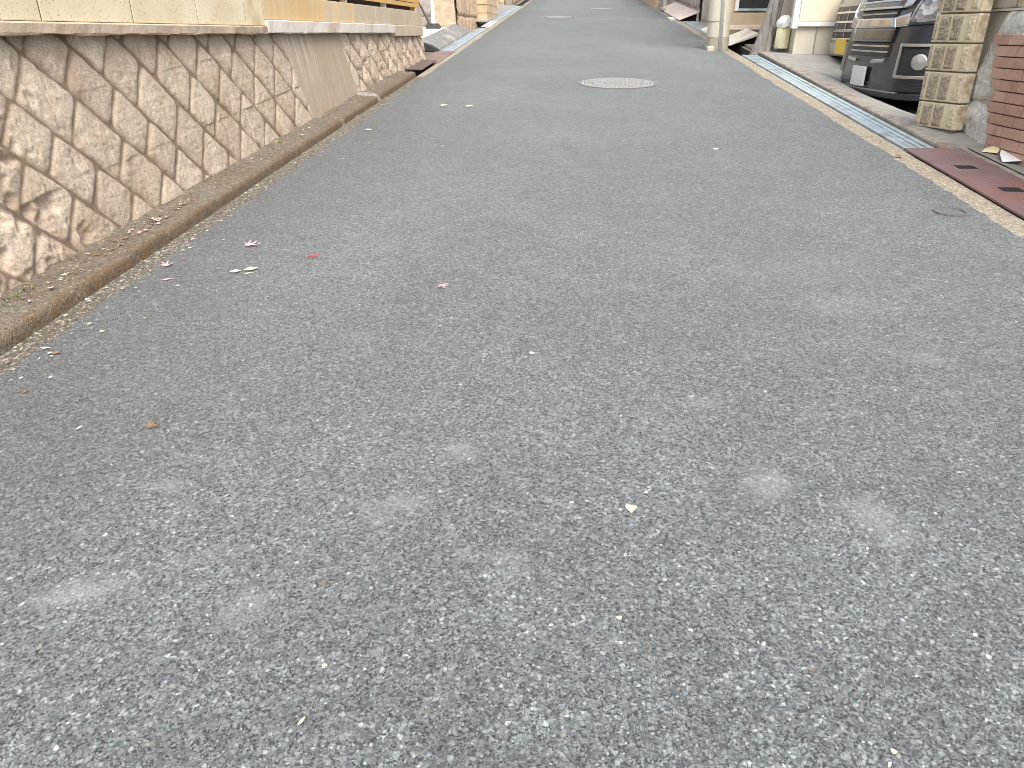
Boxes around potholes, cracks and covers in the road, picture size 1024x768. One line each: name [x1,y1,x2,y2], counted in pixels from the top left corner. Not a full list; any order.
manhole cover [578,77,657,89]
drain grate [742,55,934,152]
drain grate [441,28,488,51]
drain grate [490,6,521,21]
manhole cover [933,207,968,217]
